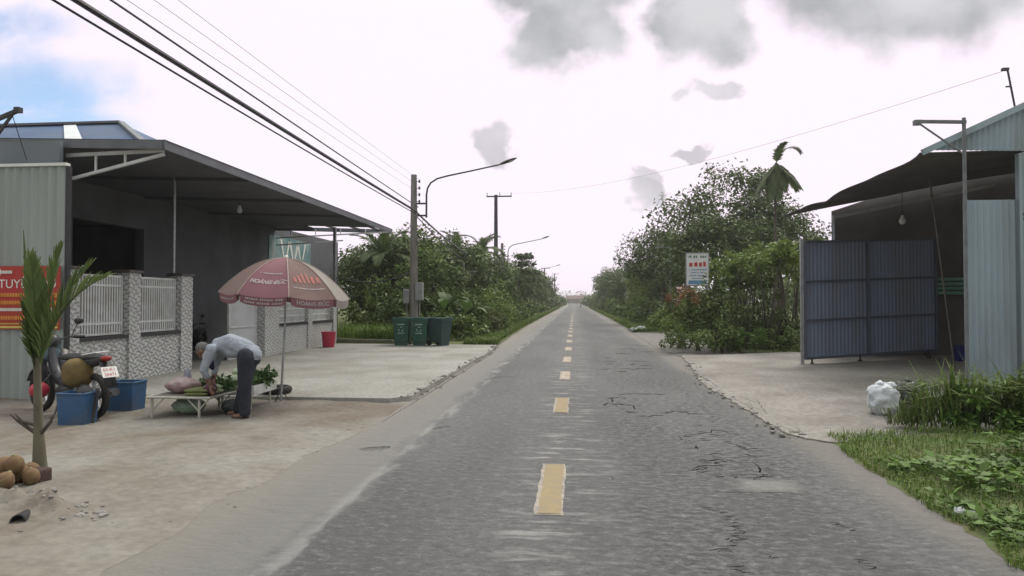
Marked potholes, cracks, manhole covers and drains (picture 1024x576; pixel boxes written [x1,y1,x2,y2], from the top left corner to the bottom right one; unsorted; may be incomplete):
crack [603,393,799,573]
